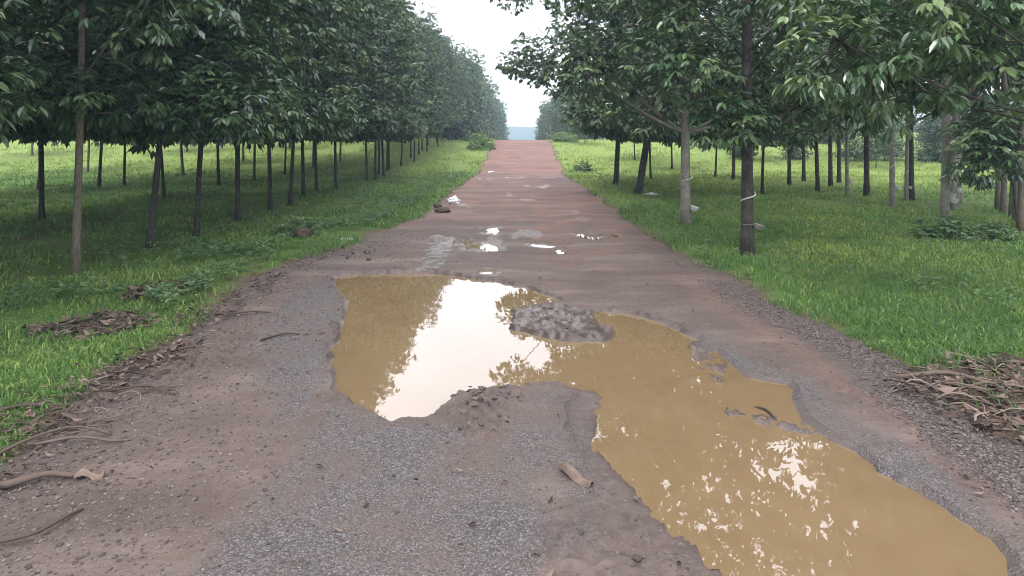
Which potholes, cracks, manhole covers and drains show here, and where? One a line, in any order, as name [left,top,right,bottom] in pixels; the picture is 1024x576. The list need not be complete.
pothole [325,268,1024,576]
pothole [462,239,501,252]
pothole [483,226,501,234]
